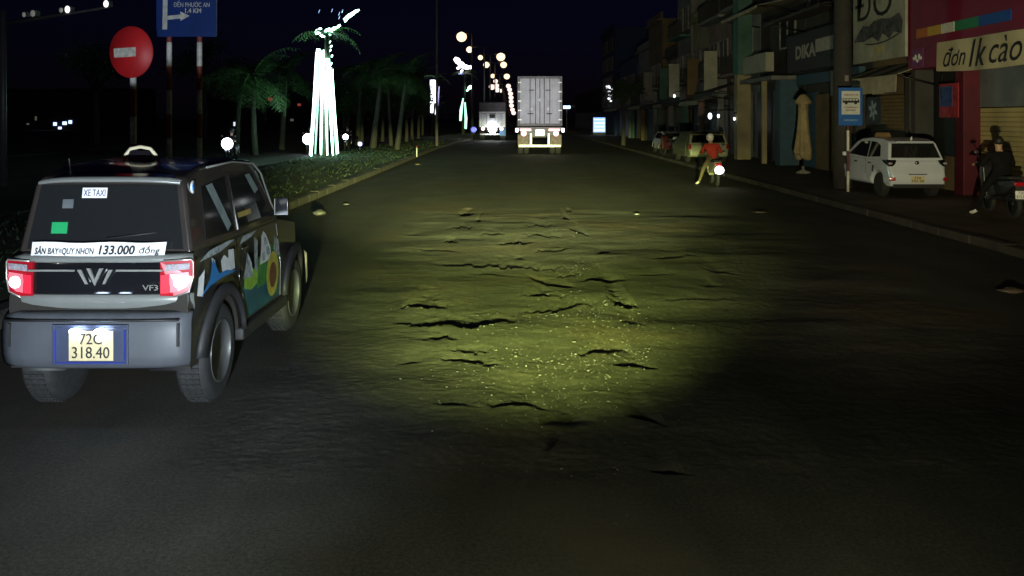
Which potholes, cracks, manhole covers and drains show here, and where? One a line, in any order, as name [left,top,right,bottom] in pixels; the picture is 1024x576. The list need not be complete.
crack [394,325,503,368]
crack [618,248,744,325]
crack [403,209,612,314]
